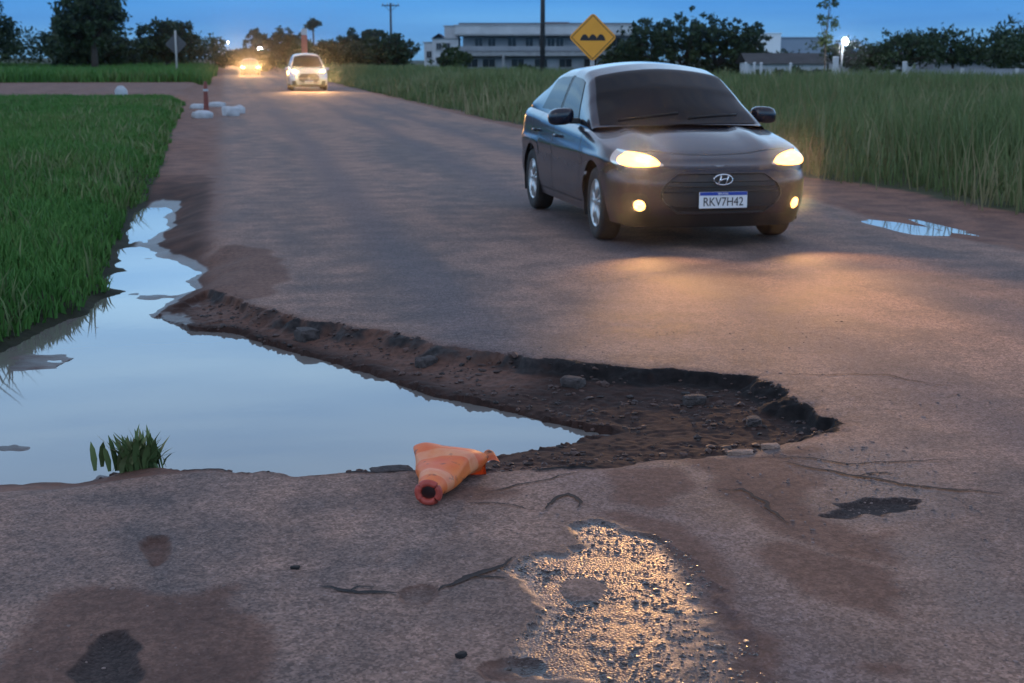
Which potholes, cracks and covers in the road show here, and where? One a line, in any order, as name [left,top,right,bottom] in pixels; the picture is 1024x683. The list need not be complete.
pothole [499,518,776,683]
pothole [22,289,845,480]
crack [755,457,1004,494]
crack [438,557,513,591]
crack [470,471,583,510]
crack [319,585,395,593]
crack [726,488,789,523]
